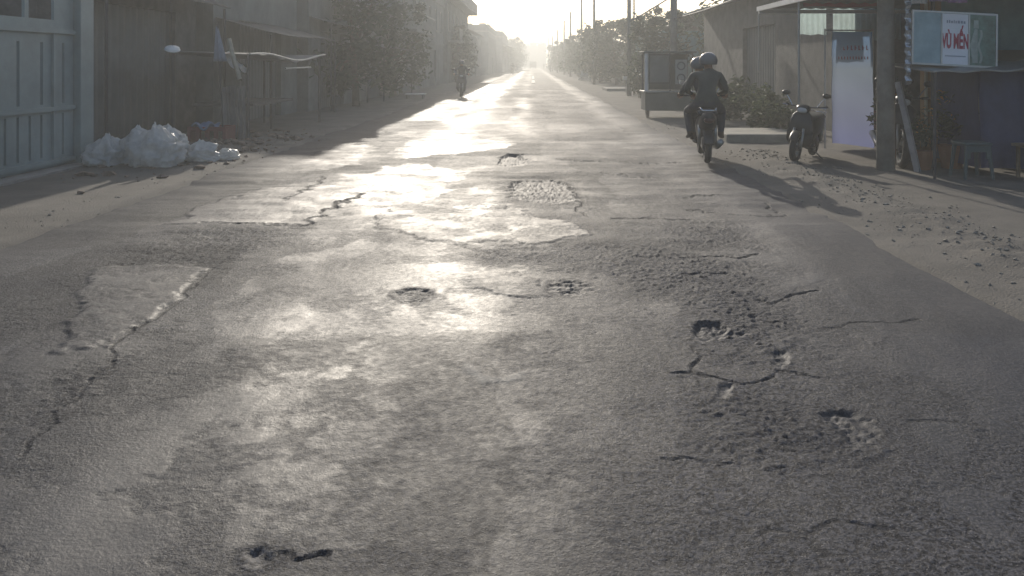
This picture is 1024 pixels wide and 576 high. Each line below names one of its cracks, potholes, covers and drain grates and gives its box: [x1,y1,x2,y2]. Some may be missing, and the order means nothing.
crack [217,176,365,227]
pothole [496,152,530,167]
pothole [389,287,436,304]
pothole [544,279,601,298]
crack [761,518,920,538]
pothole [689,319,753,344]
crack [659,455,747,467]
pothole [816,408,888,451]
pothole [764,348,794,370]
pothole [237,545,280,571]
pothole [709,382,737,400]
pothole [503,180,582,204]
